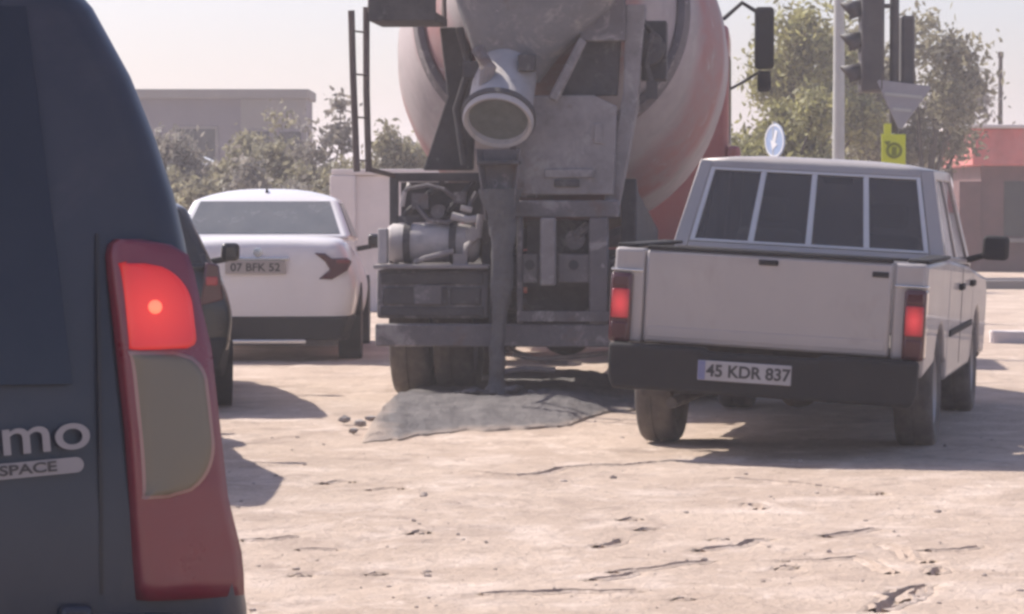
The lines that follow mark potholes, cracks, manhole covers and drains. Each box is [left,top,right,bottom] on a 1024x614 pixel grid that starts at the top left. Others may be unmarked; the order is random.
crack [481,538,771,596]
crack [321,480,404,491]
crack [461,460,685,477]
crack [789,528,984,574]
pothole [867,584,935,613]
